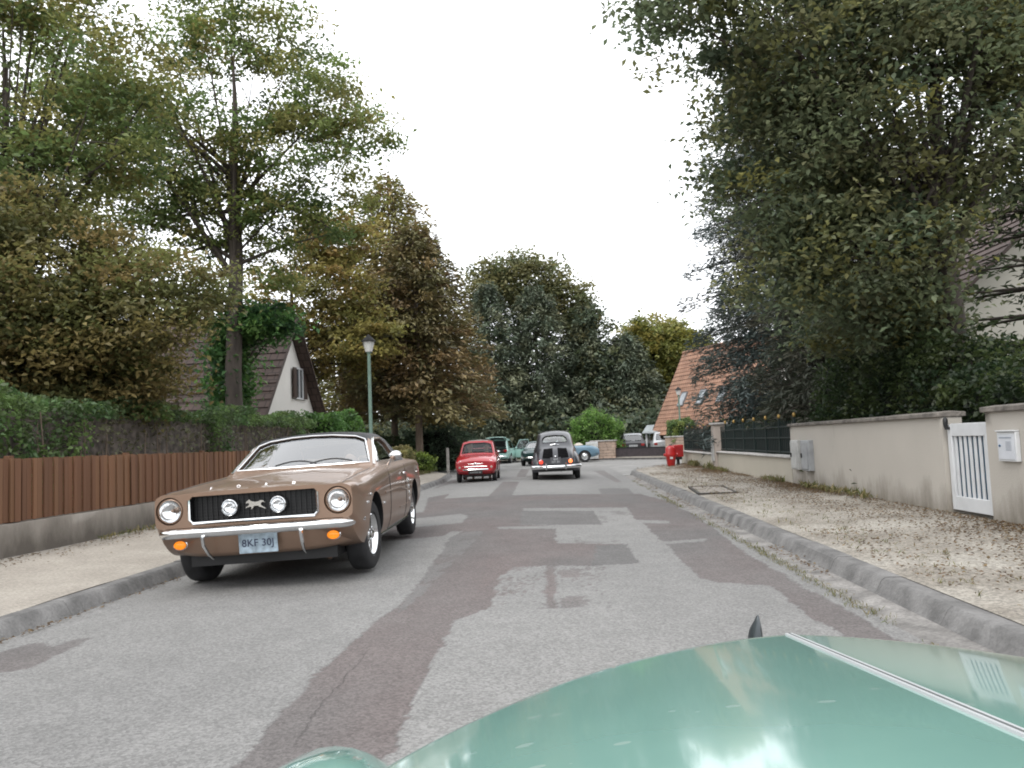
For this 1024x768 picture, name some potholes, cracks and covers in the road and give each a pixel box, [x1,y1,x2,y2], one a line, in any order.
crack [295,650,368,745]
manhole cover [688,485,737,495]
